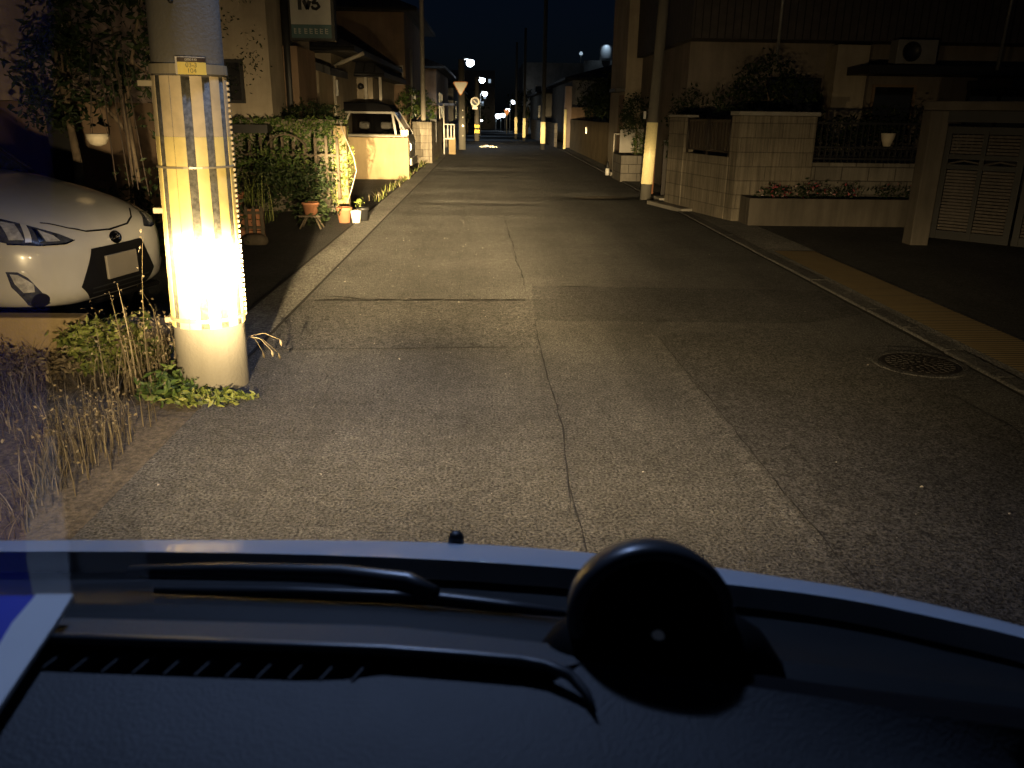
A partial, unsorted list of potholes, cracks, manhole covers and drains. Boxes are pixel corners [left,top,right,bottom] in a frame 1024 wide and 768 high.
crack [535,322,588,553]
manhole cover [871,351,970,378]
